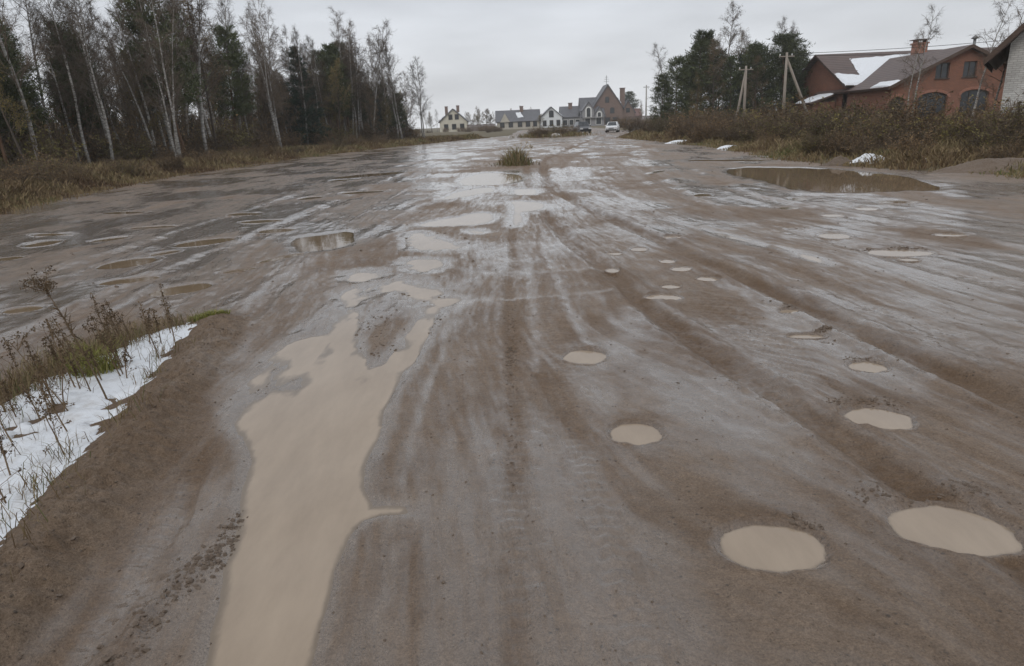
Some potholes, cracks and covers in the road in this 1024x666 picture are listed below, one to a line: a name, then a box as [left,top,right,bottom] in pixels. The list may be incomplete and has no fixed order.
pothole [861,248,940,258]
pothole [139,282,219,298]
pothole [873,496,1024,565]
pothole [91,256,164,270]
pothole [837,403,922,432]
pothole [844,359,892,373]
pothole [604,418,669,446]
pothole [708,516,841,574]
pothole [559,345,610,365]
